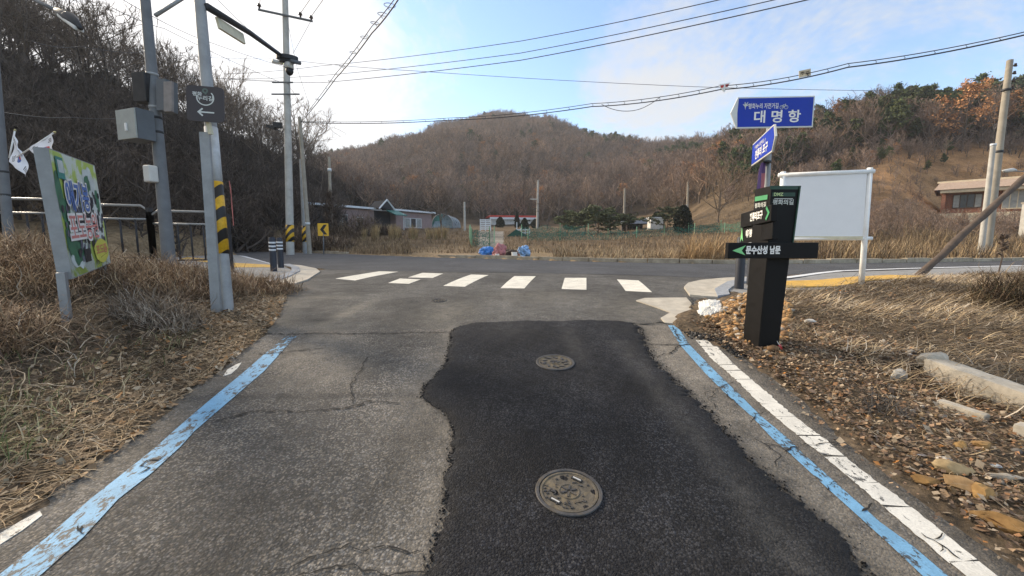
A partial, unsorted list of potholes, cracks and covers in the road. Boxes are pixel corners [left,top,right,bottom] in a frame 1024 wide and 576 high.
manhole cover [535,469,603,517]
crack [648,327,690,356]
crack [702,382,837,466]
manhole cover [536,354,575,371]
crack [260,542,426,576]
crack [214,357,397,421]
